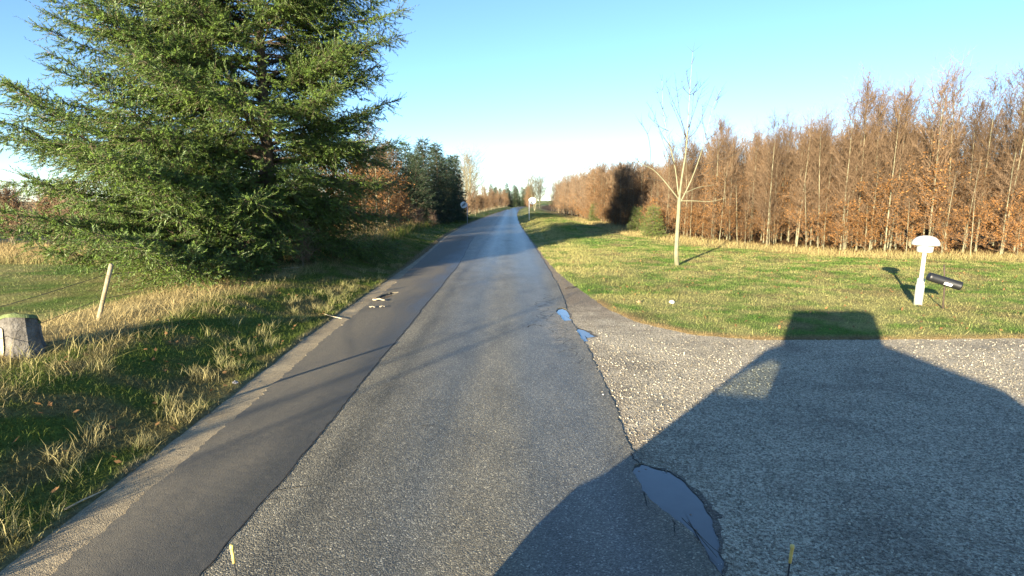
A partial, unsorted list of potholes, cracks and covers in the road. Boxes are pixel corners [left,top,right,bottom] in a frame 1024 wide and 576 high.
pothole [633,464,728,576]
pothole [576,328,599,342]
pothole [556,308,572,321]
